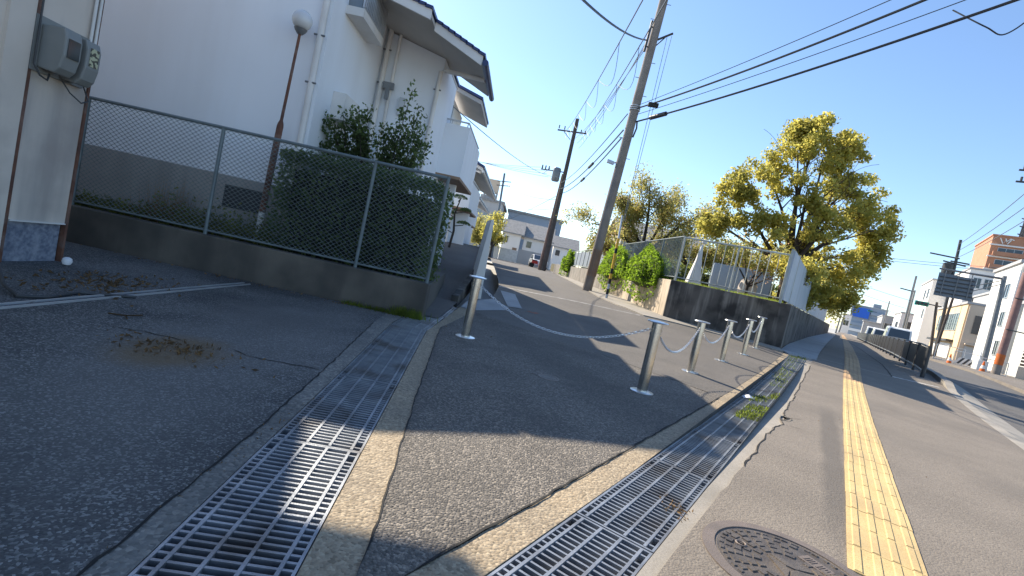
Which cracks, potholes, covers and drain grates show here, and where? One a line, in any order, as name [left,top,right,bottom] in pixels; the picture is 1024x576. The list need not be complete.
drain grate [487,513,653,576]
drain grate [274,374,397,455]
drain grate [340,342,415,386]
drain grate [778,361,802,372]
drain grate [784,355,806,365]
drain grate [722,398,770,422]
drain grate [739,388,778,407]
drain grate [771,366,797,378]
crack [744,366,810,466]
drain grate [654,428,740,484]
manhole cover [702,520,859,576]
drain grate [373,323,426,352]
